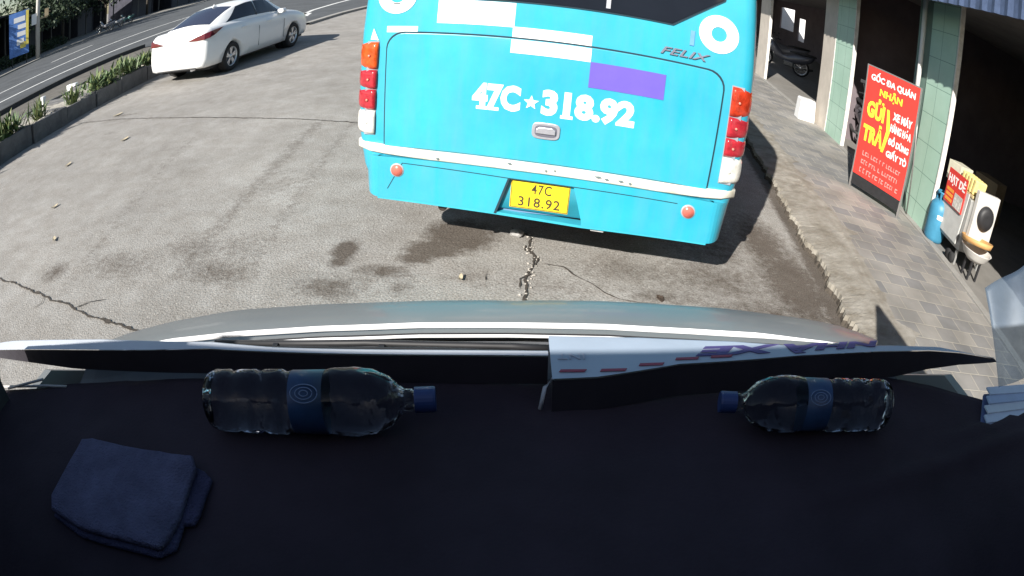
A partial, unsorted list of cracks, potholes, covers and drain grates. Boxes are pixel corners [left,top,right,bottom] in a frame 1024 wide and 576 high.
crack [512,228,656,304]
crack [0,277,138,331]
